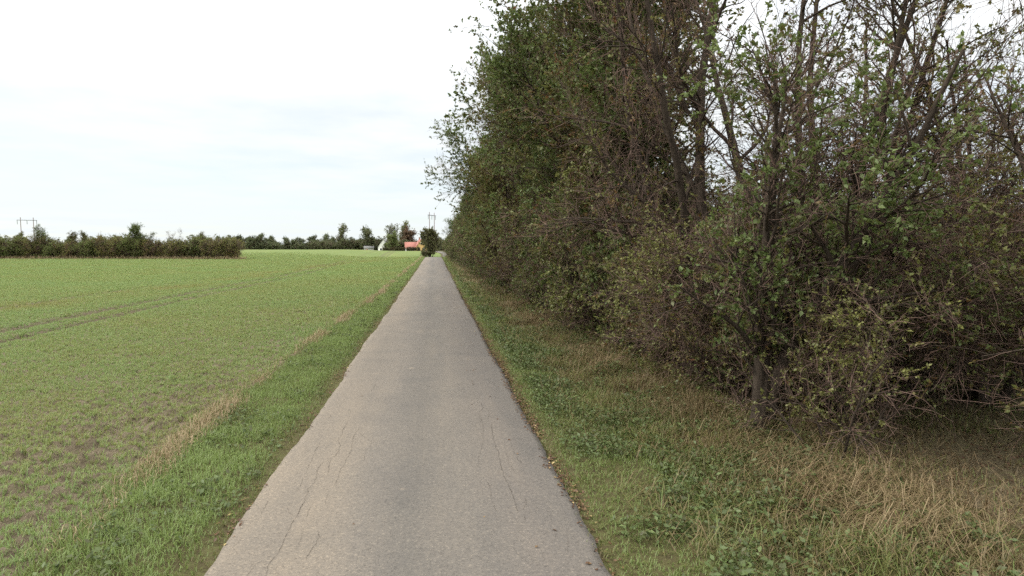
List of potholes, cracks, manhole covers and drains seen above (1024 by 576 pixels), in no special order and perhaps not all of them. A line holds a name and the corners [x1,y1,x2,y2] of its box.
crack [247,427,371,575]
